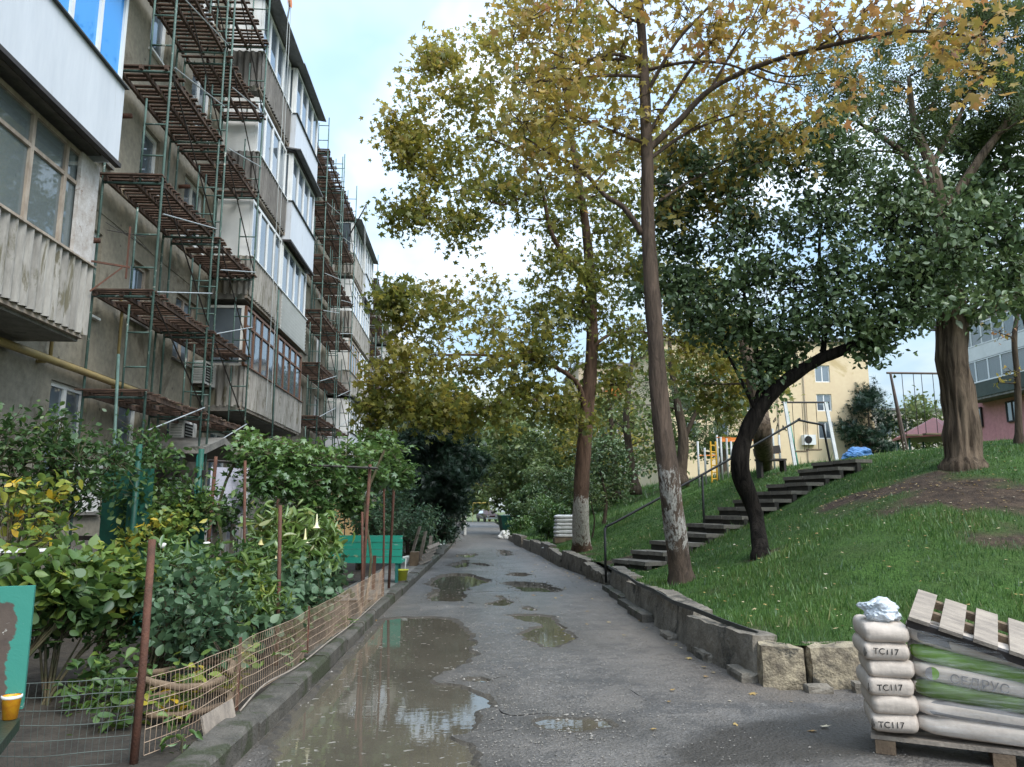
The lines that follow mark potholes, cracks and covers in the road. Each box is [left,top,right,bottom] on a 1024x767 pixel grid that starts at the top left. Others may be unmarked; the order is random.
pothole [504,612,582,648]
pothole [485,595,514,606]
pothole [514,711,626,740]
pothole [249,615,506,767]
pothole [496,580,568,593]
pothole [416,573,492,602]
crack [492,709,549,733]
pothole [441,560,474,568]
